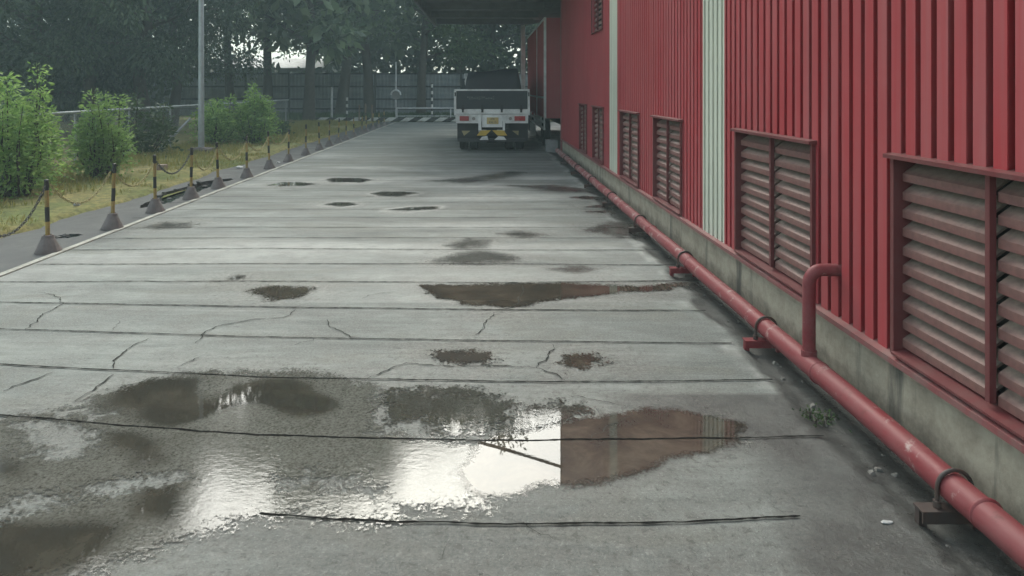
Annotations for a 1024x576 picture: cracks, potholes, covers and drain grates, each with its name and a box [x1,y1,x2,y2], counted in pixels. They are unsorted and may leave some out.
crack [182,291,306,365]
crack [475,286,524,335]
crack [75,339,147,401]
